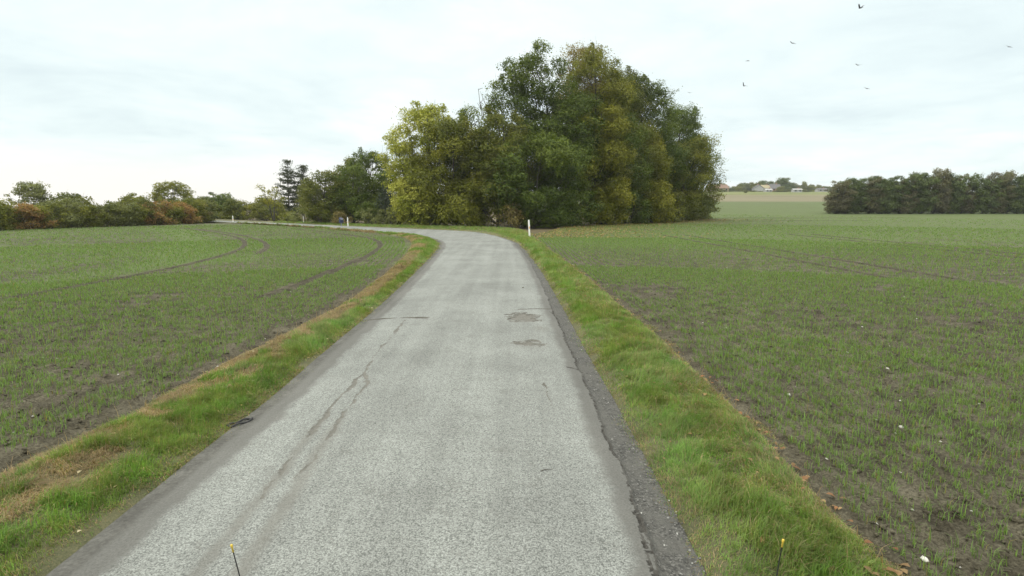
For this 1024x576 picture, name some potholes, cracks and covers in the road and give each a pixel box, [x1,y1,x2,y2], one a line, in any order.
pothole [511,339,547,347]
crack [260,317,428,499]
crack [517,304,660,576]
pothole [504,312,544,322]
